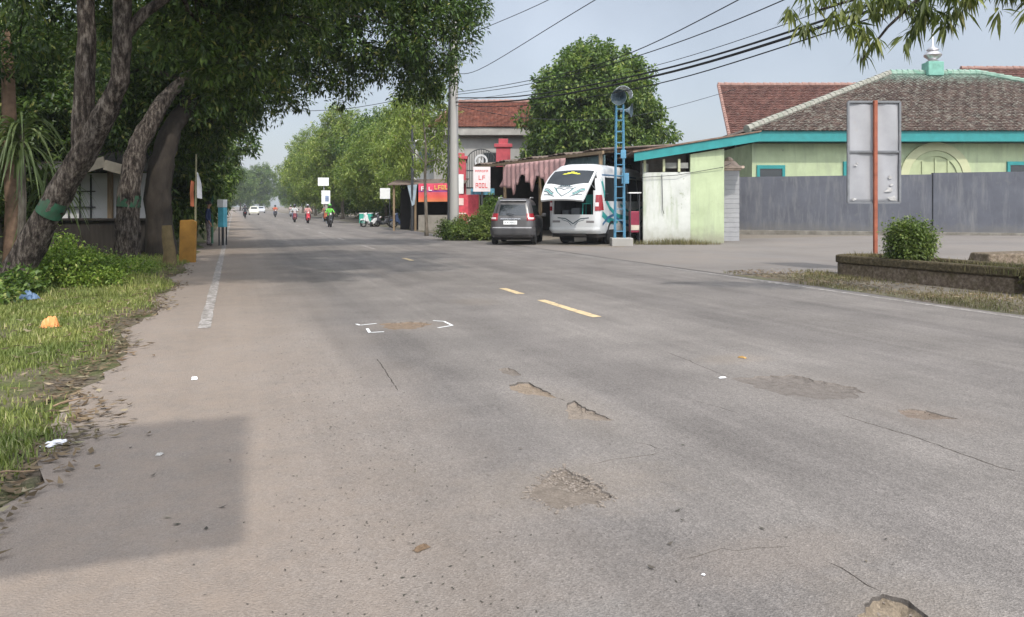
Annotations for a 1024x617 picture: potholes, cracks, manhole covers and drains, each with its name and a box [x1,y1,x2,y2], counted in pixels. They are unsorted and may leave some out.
pothole [379,321,433,330]
crack [822,559,877,590]
pothole [509,381,556,398]
pothole [857,594,929,617]
pothole [521,463,618,514]
pothole [898,409,958,420]
pothole [499,368,521,376]
pothole [565,401,613,421]
crack [684,547,778,559]
